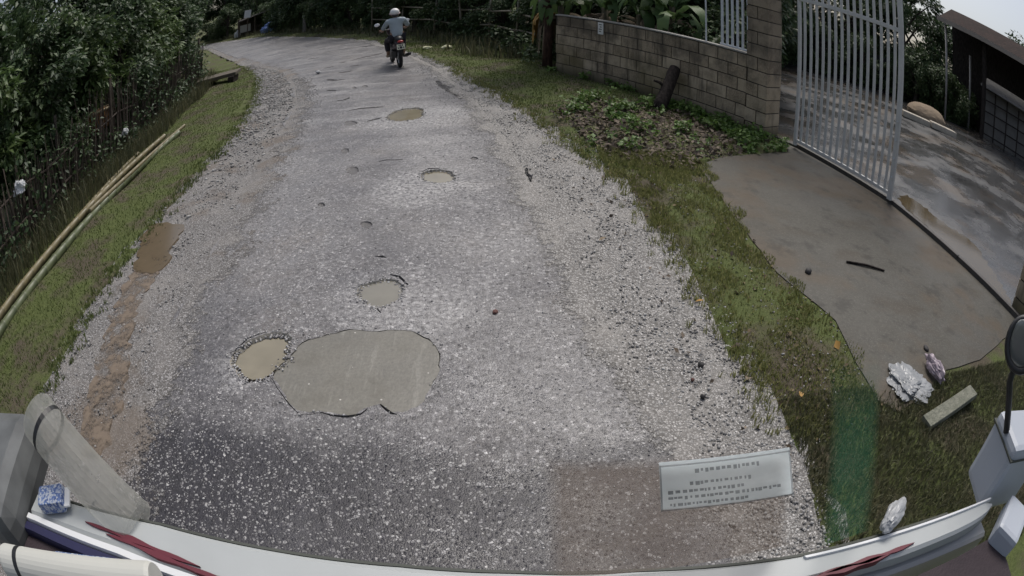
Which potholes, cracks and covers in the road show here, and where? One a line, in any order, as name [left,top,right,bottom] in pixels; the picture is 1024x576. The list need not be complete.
pothole [421,170,456,183]
crack [436,81,460,99]
pothole [230,331,292,383]
pothole [357,278,405,307]
crack [375,256,409,285]
pothole [385,107,424,121]
